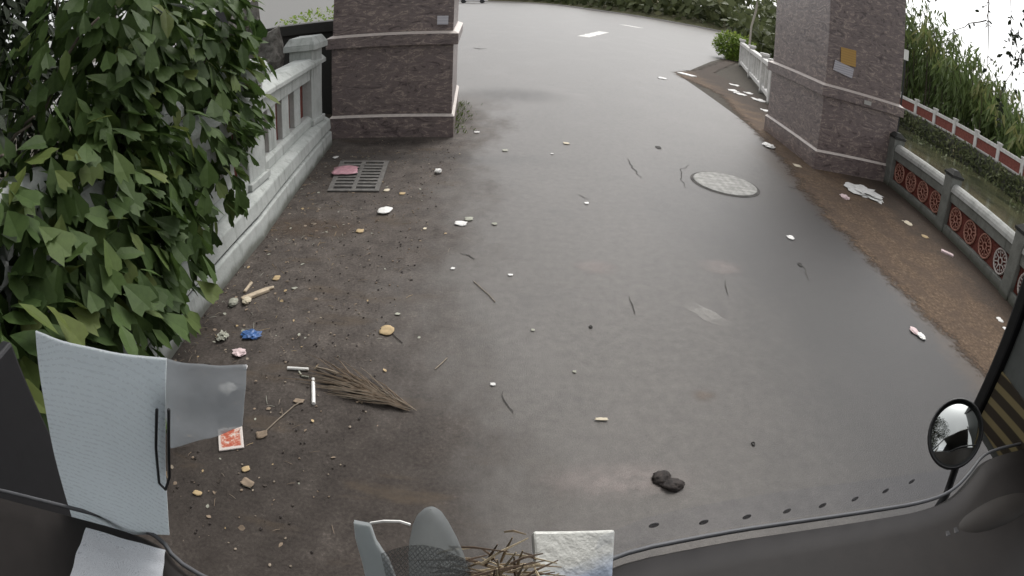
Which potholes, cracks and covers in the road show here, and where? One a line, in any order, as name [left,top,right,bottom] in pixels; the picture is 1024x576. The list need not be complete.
manhole cover [690,172,760,198]
drain grate [327,161,389,192]
